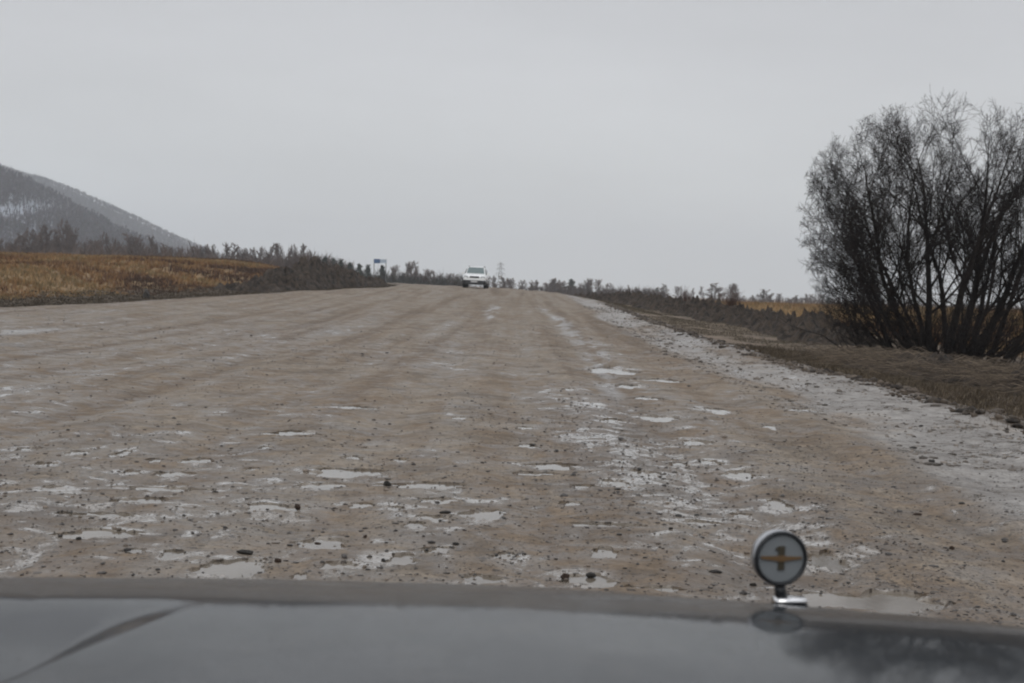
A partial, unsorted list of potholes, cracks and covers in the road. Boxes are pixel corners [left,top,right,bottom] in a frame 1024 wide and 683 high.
pothole [309,467,391,478]
pothole [185,558,270,578]
pothole [520,462,584,470]
pothole [381,552,420,565]
pothole [767,498,795,512]
pothole [241,502,308,511]
pothole [559,572,621,588]
pothole [289,537,352,549]
pothole [51,528,148,539]
pothole [587,366,642,375]
pothole [701,407,732,415]
pothole [457,508,509,521]
